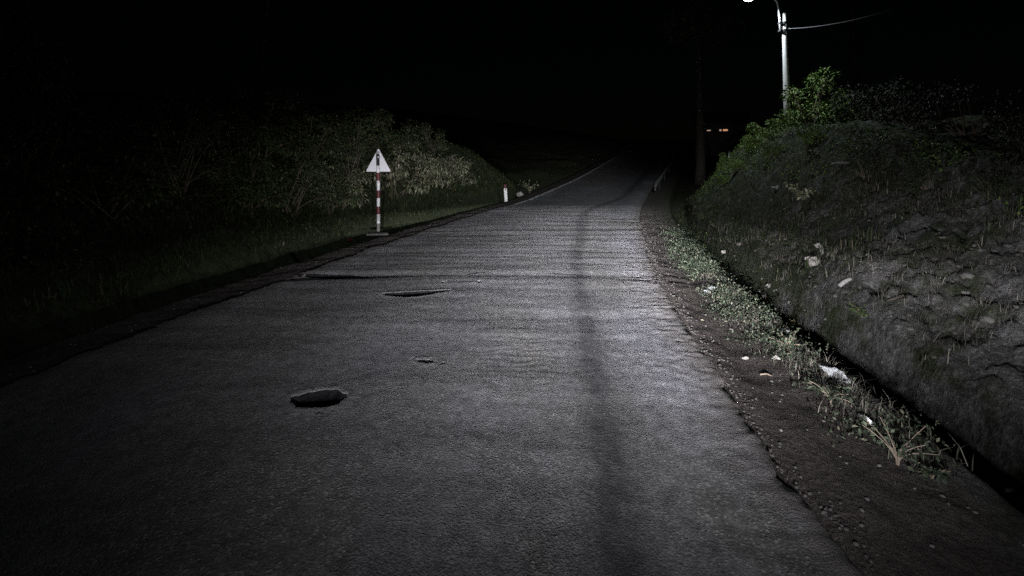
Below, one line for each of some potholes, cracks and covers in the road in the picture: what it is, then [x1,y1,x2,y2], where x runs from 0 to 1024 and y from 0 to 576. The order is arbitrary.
pothole [408,355,446,367]
pothole [276,383,361,415]
pothole [376,288,456,299]
